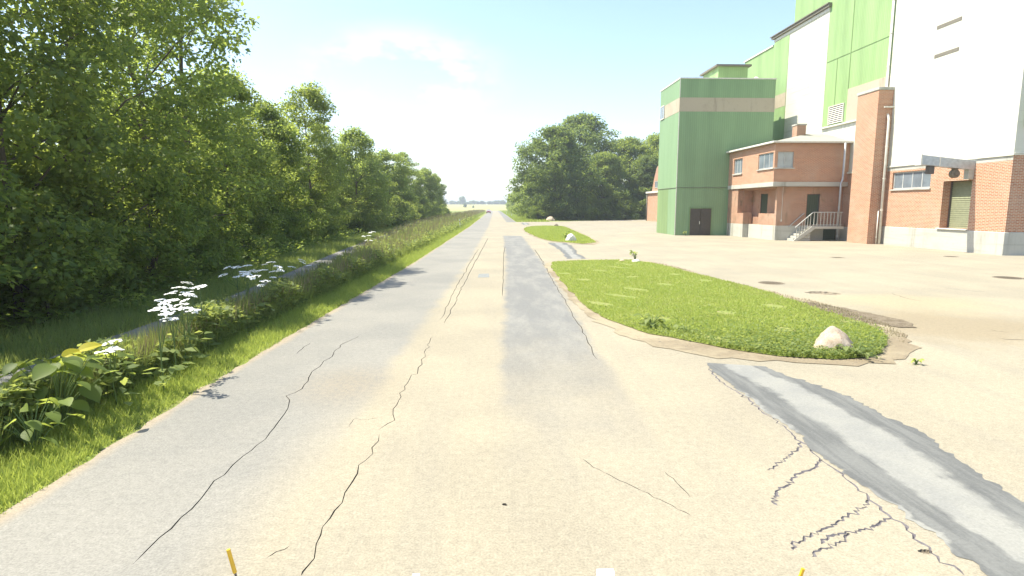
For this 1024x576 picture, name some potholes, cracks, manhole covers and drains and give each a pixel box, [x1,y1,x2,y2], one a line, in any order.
crack [708,369,964,575]
crack [133,342,346,564]
crack [268,338,431,575]
crack [583,459,690,515]
